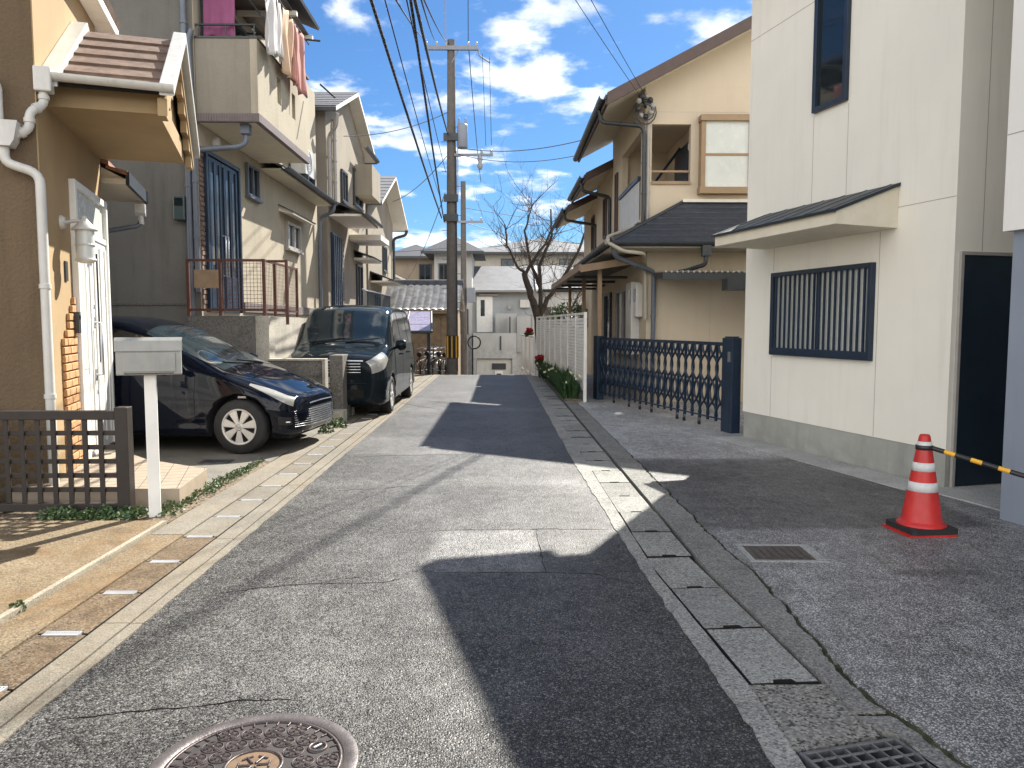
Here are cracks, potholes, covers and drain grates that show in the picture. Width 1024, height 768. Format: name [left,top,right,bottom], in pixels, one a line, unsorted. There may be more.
crack [226,578,398,593]
crack [37,699,305,725]
drain grate [799,737,938,768]
manhole cover [148,713,359,768]
